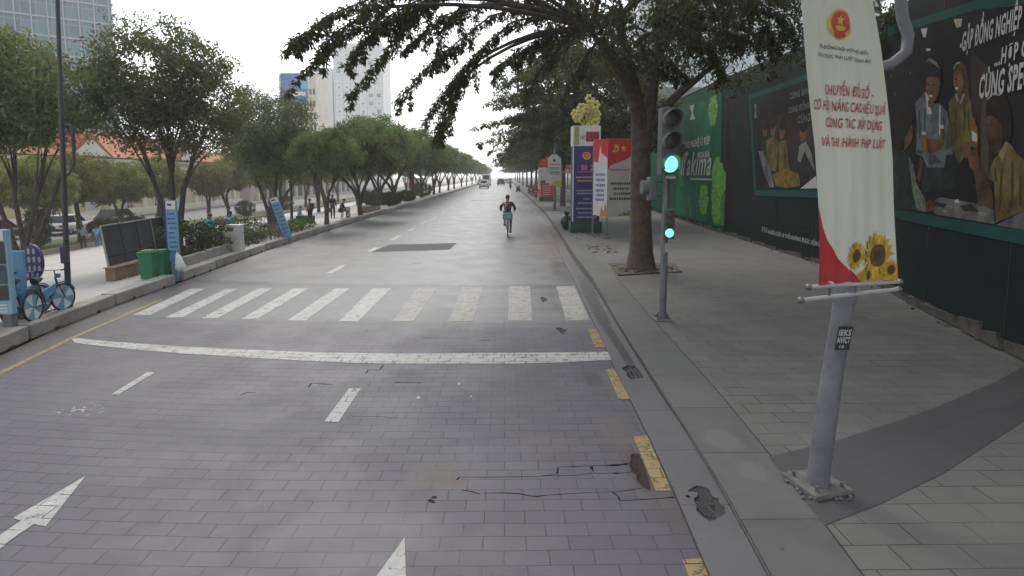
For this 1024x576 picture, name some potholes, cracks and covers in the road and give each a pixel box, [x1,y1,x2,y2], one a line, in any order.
pothole [629,453,651,491]
crack [456,463,674,501]
